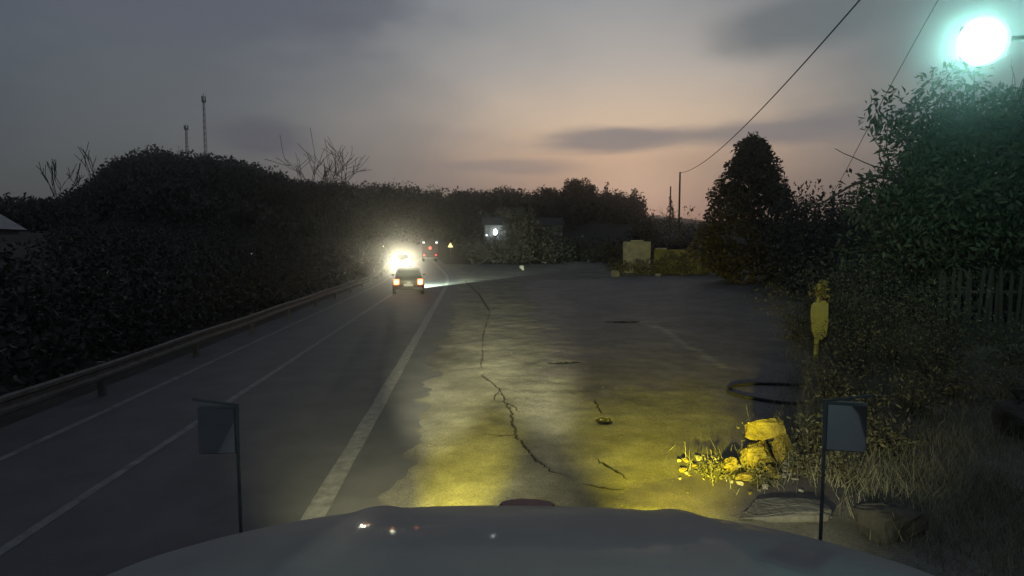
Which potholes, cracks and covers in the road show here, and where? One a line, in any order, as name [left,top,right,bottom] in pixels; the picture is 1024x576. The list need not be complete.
crack [580,458,626,490]
crack [481,375,570,477]
